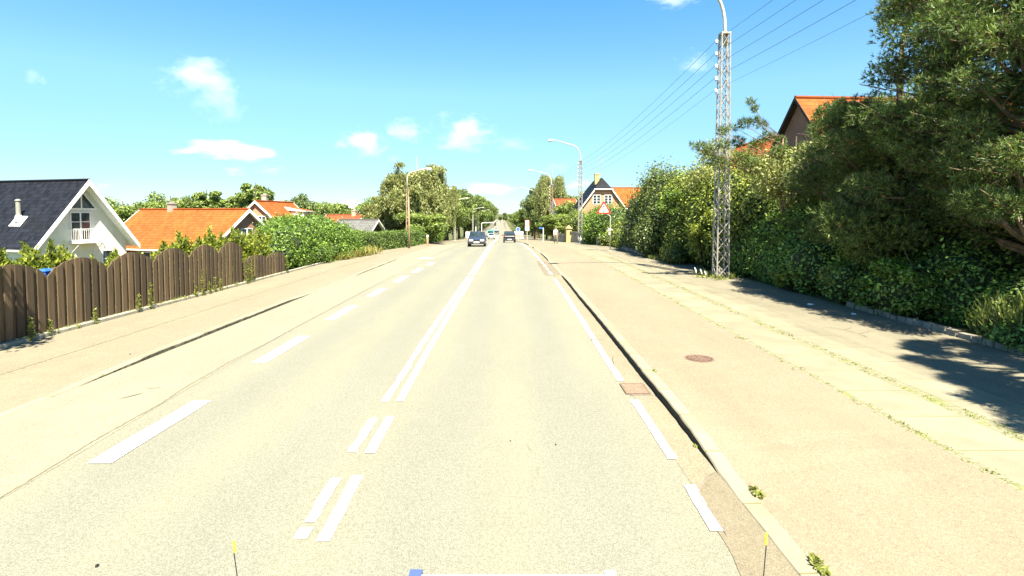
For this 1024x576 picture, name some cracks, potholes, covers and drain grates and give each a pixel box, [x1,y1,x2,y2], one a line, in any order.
manhole cover [684,354,714,363]
